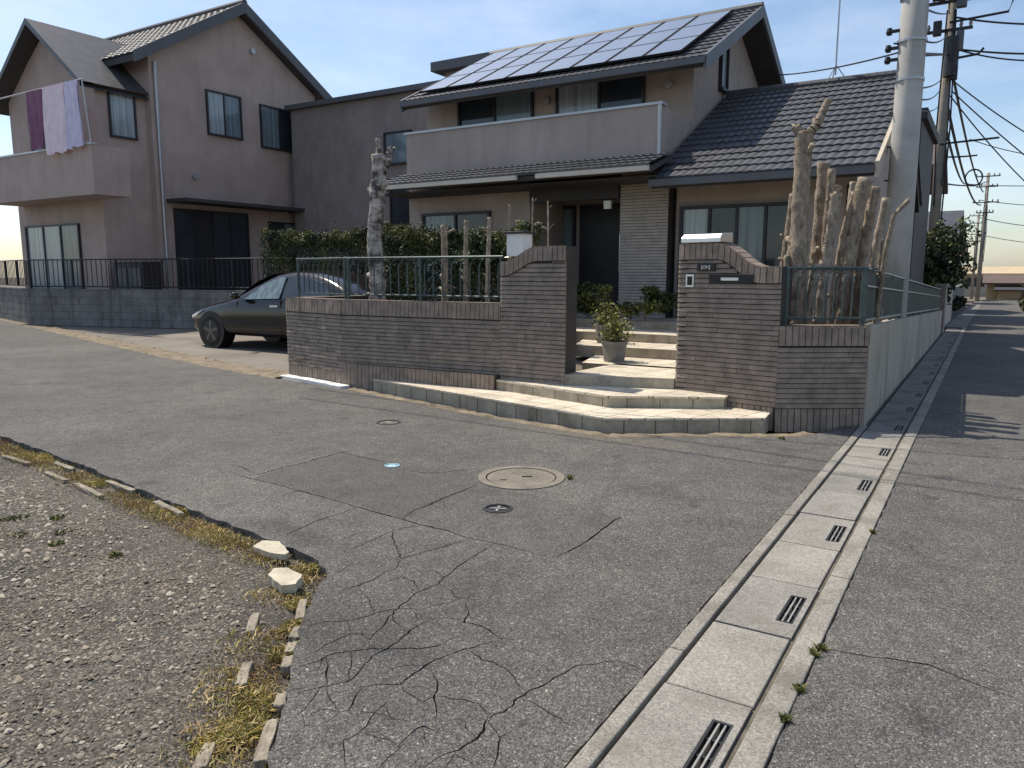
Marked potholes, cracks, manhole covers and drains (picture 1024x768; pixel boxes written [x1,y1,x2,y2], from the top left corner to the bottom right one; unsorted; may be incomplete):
manhole cover [478,466,565,490]
utility cover [483,504,513,513]
crack [557,516,621,557]
crack [832,650,1023,702]
